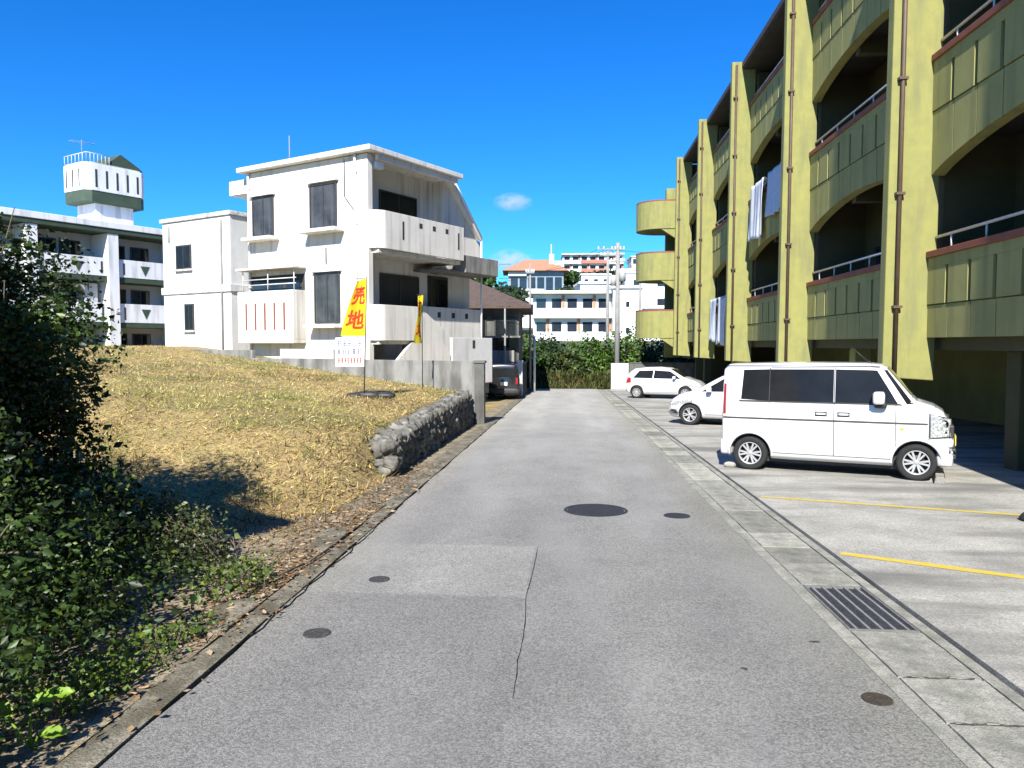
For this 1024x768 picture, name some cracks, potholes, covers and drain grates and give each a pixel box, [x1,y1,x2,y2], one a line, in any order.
manhole cover [564,504,628,517]
manhole cover [861,692,894,706]
manhole cover [303,628,331,639]
drain grate [803,585,920,633]
